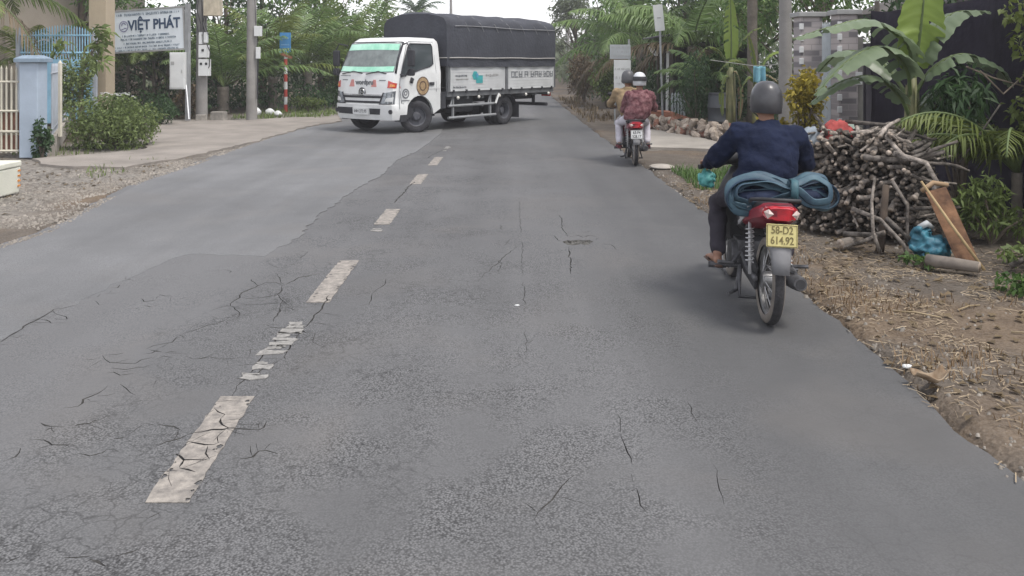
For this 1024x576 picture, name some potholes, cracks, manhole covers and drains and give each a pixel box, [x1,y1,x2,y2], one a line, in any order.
crack [1,308,67,342]
crack [527,467,573,520]
crack [225,251,357,396]
crack [482,203,533,356]
crack [618,415,644,509]
crack [8,322,220,463]
crack [158,411,277,480]
